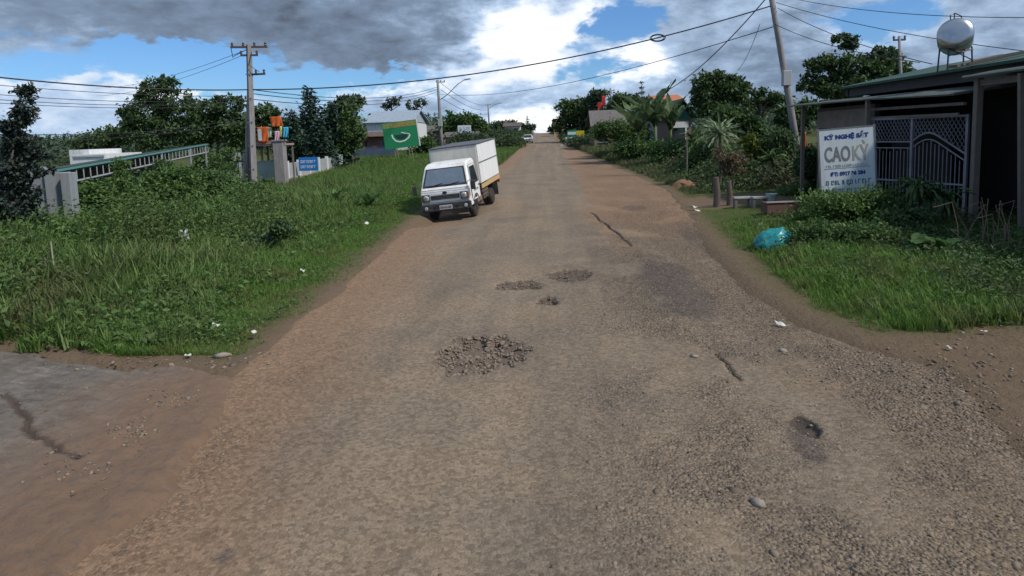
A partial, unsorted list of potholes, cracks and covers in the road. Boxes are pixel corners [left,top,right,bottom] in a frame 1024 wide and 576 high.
pothole [544,269,592,282]
crack [590,212,632,247]
pothole [788,417,822,439]
crack [718,354,743,381]
pothole [495,280,542,290]
pothole [433,329,552,378]
crack [1,393,83,460]
pothole [535,297,559,305]
